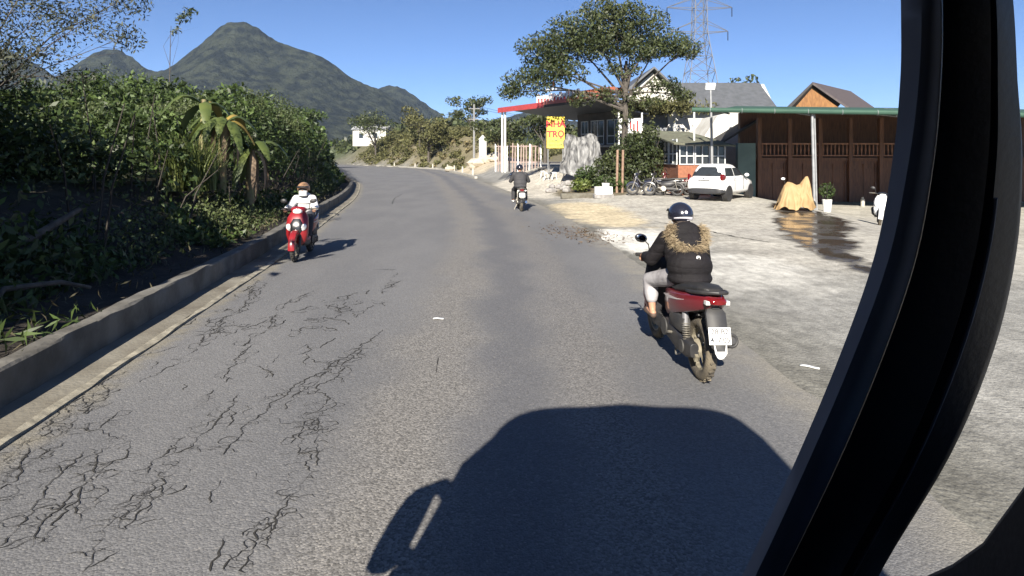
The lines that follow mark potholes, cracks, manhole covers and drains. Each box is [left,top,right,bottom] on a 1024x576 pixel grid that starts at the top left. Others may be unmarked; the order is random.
crack [69,269,398,575]
crack [0,372,136,549]
